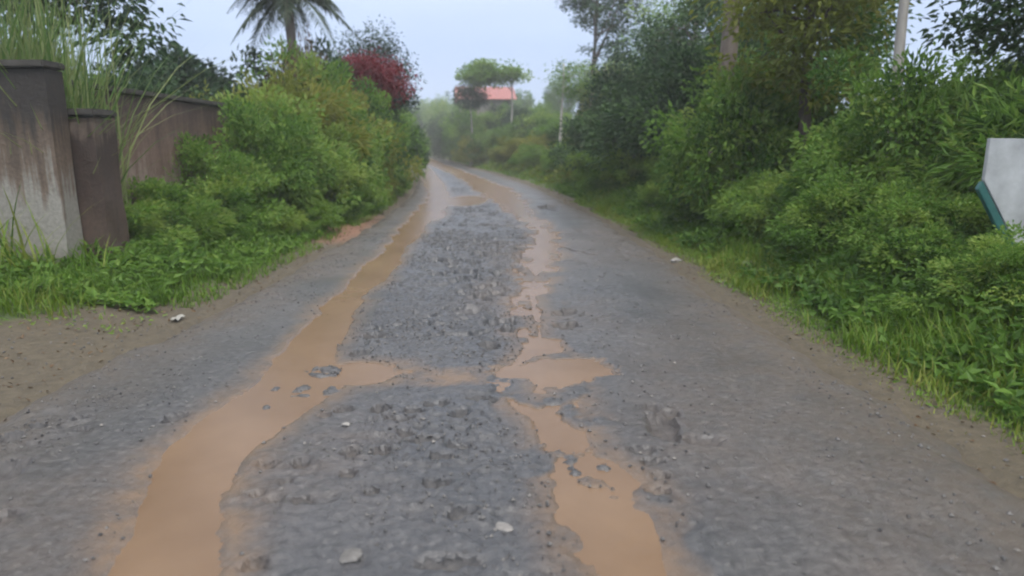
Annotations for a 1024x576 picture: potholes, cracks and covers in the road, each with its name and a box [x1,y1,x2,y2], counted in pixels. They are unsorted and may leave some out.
pothole [369,445,391,456]
pothole [291,494,316,505]
pothole [410,435,442,444]
pothole [642,456,667,466]
pothole [159,411,190,424]
pothole [370,404,392,414]
pothole [645,412,682,443]
pothole [643,486,672,495]
pothole [476,340,499,351]
pothole [332,405,355,413]
pothole [397,427,414,437]
pothole [485,349,621,395]
